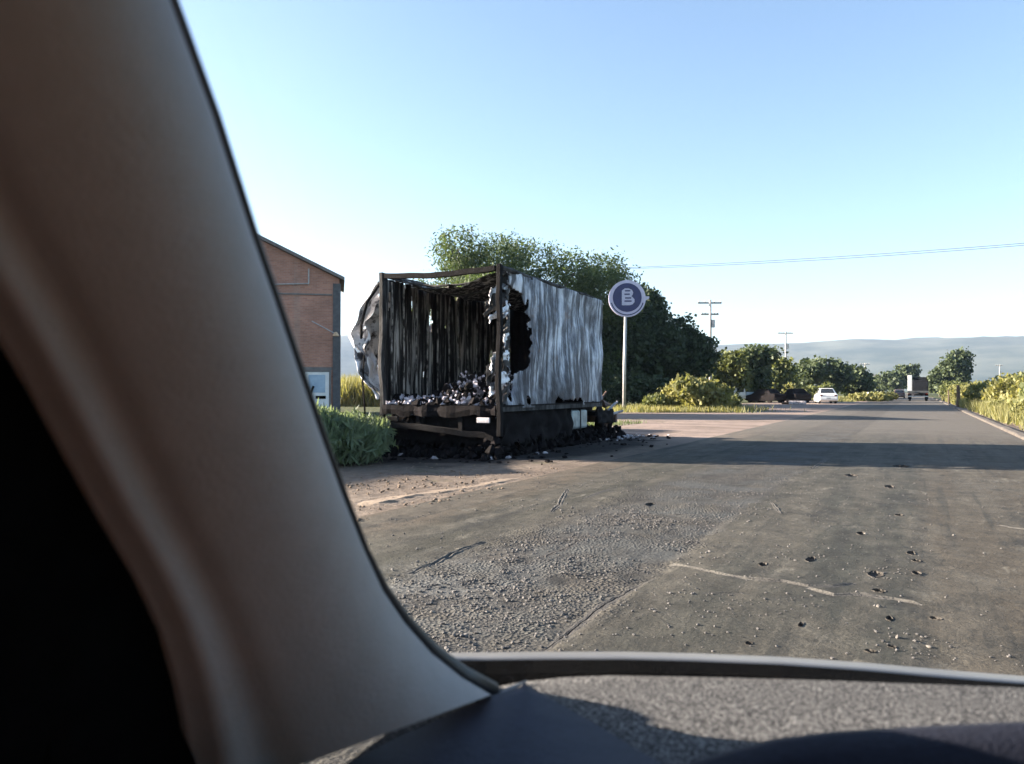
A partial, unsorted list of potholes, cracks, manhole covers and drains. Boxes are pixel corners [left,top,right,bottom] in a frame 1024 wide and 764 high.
crack [550,487,617,512]
crack [407,542,486,574]
